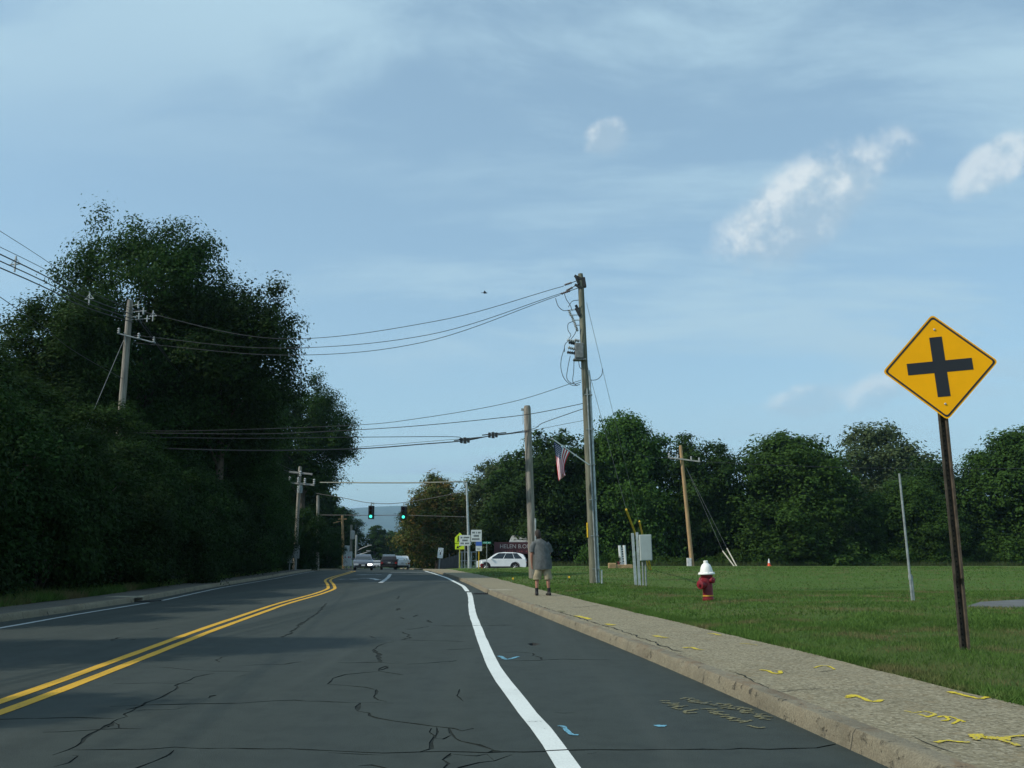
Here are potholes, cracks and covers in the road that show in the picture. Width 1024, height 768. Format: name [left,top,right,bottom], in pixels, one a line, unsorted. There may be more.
crack [0,596,835,768]
